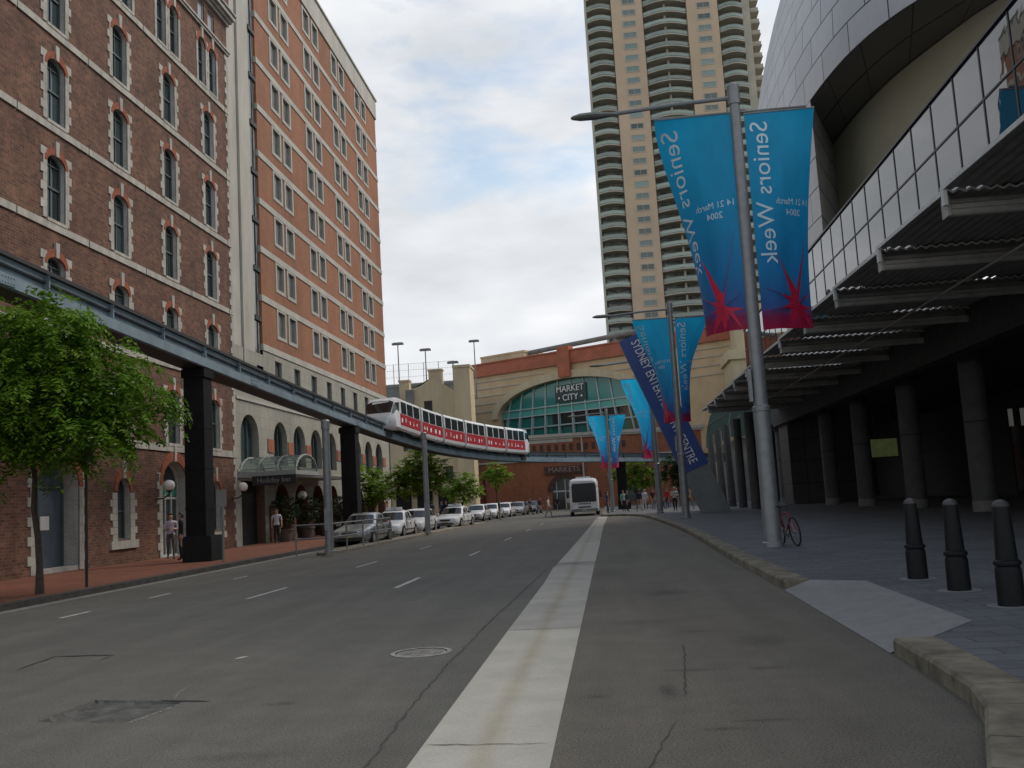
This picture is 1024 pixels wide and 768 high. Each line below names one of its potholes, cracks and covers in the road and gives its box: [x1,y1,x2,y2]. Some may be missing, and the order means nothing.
crack [648,721,677,768]
manhole cover [391,647,452,658]
